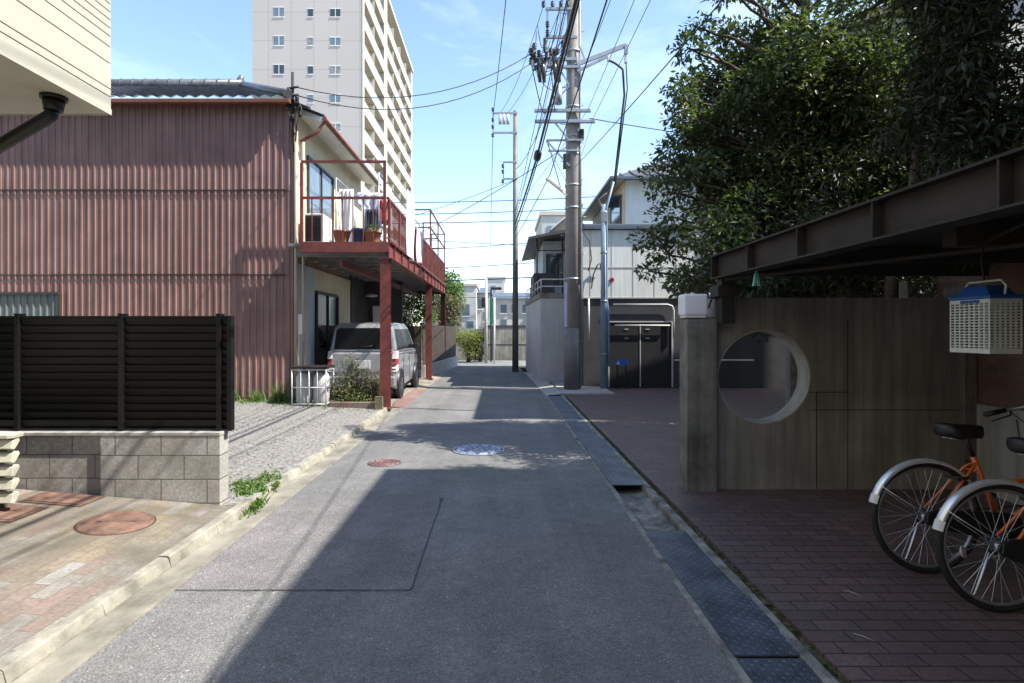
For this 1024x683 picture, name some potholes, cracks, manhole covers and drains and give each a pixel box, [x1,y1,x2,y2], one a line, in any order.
manhole cover [451,444,506,456]
manhole cover [367,459,402,467]
manhole cover [73,511,156,536]
